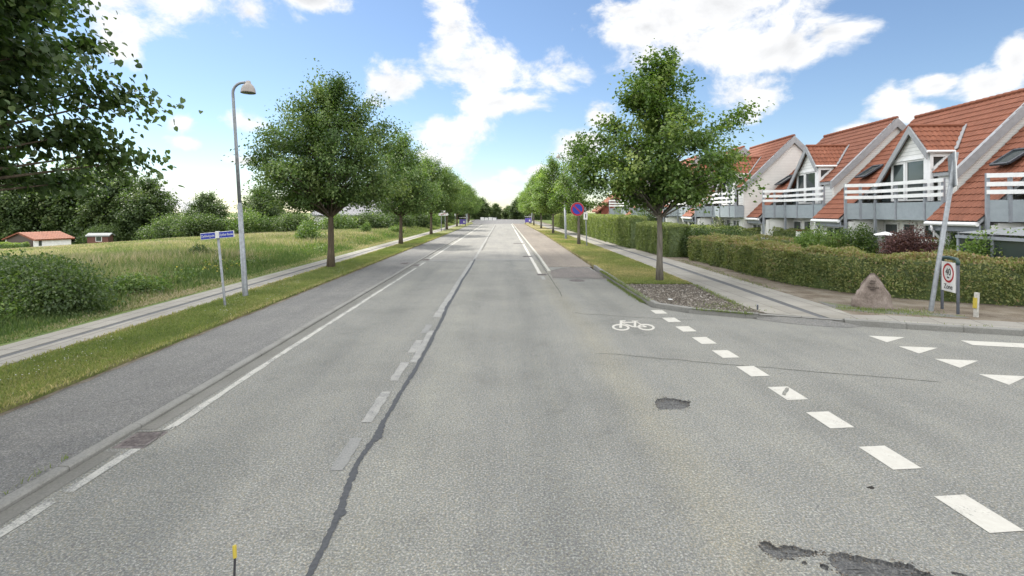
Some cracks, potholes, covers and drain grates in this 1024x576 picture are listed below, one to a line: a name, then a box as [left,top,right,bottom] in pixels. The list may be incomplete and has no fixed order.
pothole [653,396,690,411]
drain grate [112,431,168,448]
pothole [753,540,827,562]
pothole [820,551,936,576]
